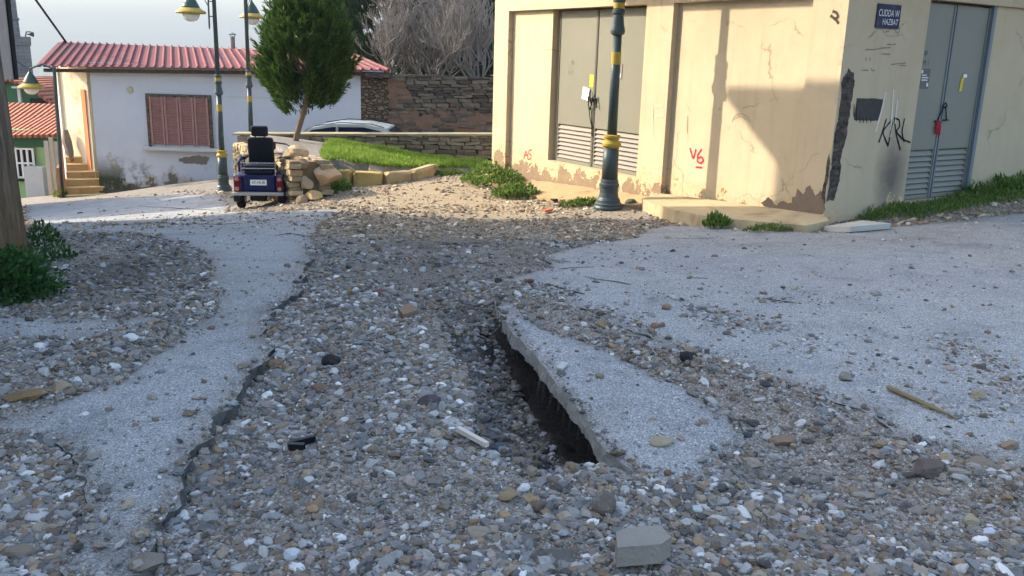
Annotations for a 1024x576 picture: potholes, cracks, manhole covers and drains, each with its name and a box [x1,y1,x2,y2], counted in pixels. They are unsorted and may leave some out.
pothole [447,304,559,470]
